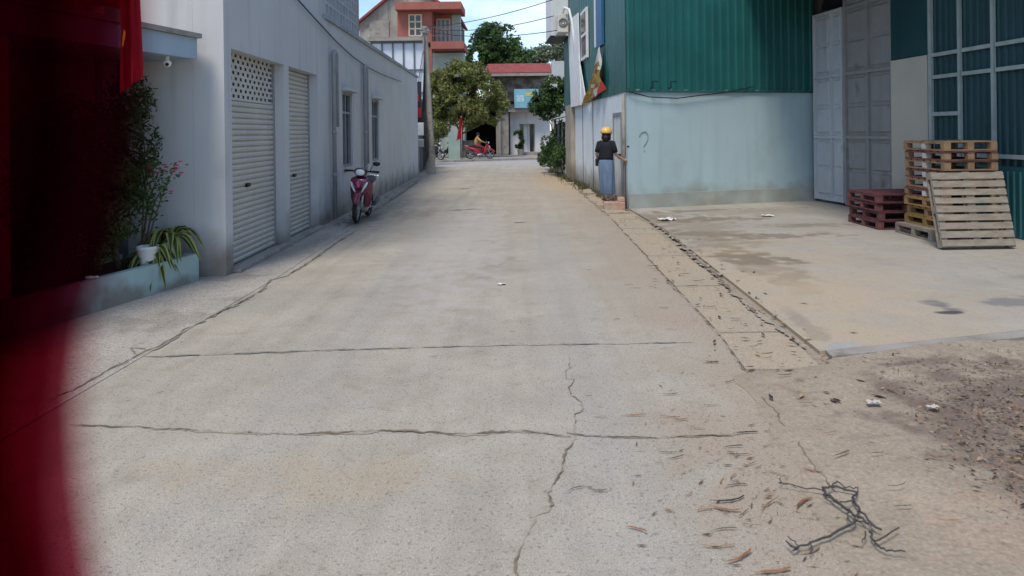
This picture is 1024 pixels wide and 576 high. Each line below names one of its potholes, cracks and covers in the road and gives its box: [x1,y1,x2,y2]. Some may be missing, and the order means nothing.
crack [80,358,740,576]
